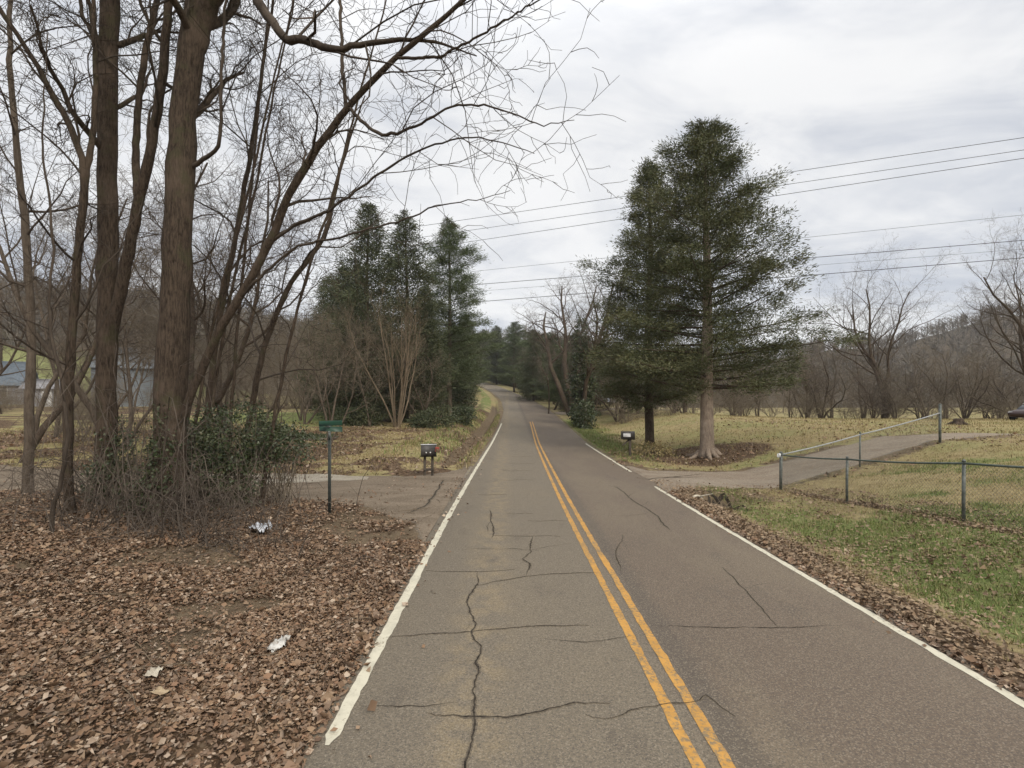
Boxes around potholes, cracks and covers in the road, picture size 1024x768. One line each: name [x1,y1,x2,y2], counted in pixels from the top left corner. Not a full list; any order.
crack [361,494,735,768]
crack [655,568,838,628]
crack [614,474,699,570]
